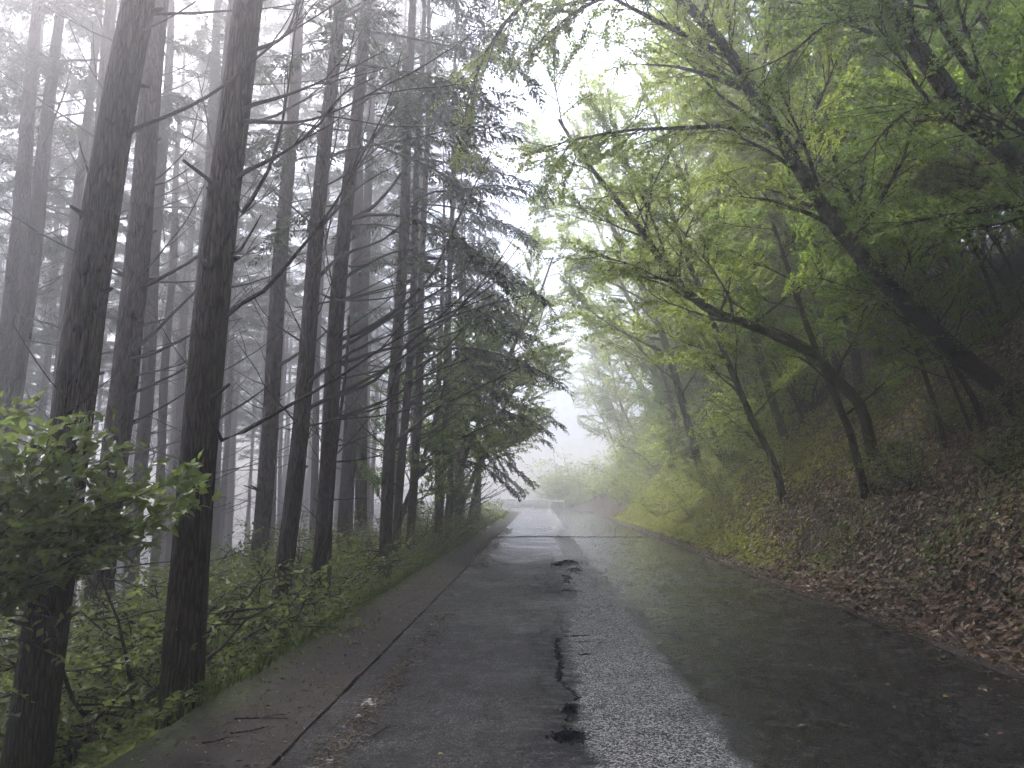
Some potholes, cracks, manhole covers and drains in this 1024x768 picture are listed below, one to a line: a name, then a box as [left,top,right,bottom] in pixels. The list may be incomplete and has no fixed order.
pothole [546,726,591,745]
